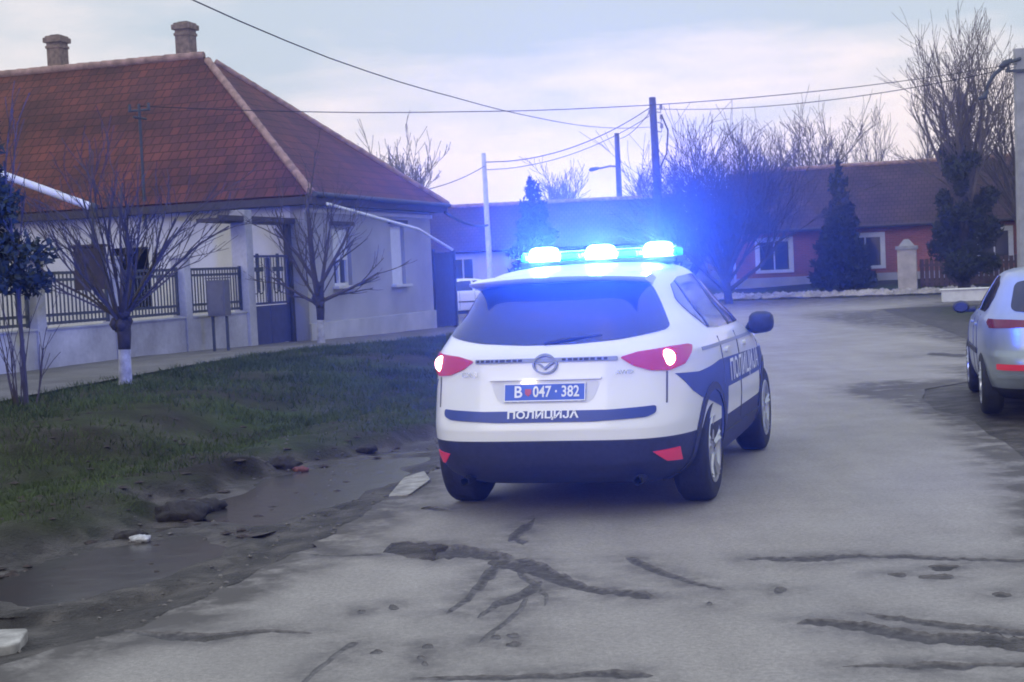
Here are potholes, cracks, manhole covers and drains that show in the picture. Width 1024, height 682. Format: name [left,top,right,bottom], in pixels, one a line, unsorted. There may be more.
crack [446,518,724,643]
crack [746,554,1024,563]
crack [410,669,653,681]
crack [797,613,1024,671]
crack [123,629,359,682]
